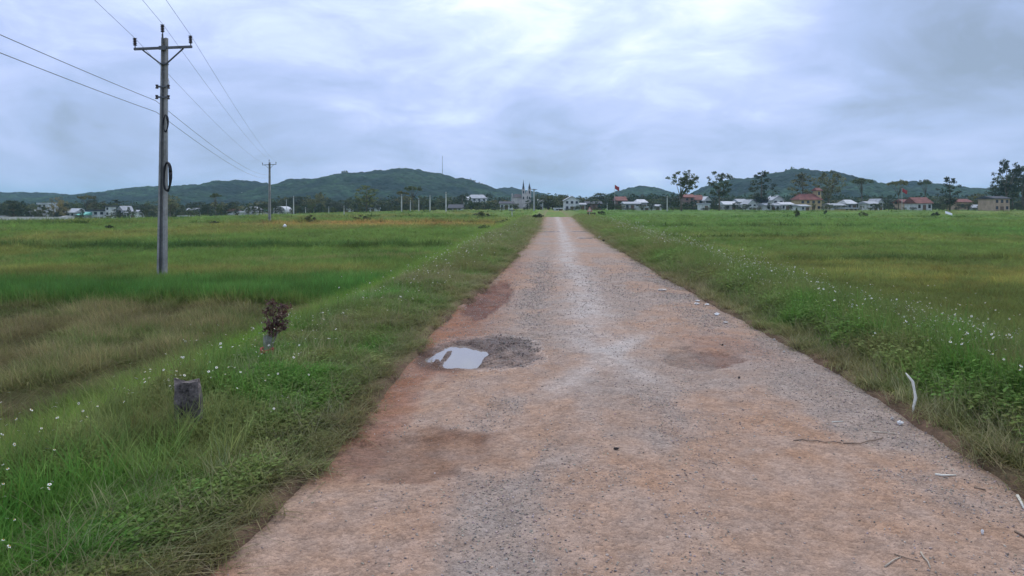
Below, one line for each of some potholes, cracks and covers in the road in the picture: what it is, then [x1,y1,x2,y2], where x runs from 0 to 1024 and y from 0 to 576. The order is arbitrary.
pothole [432,333,551,372]
